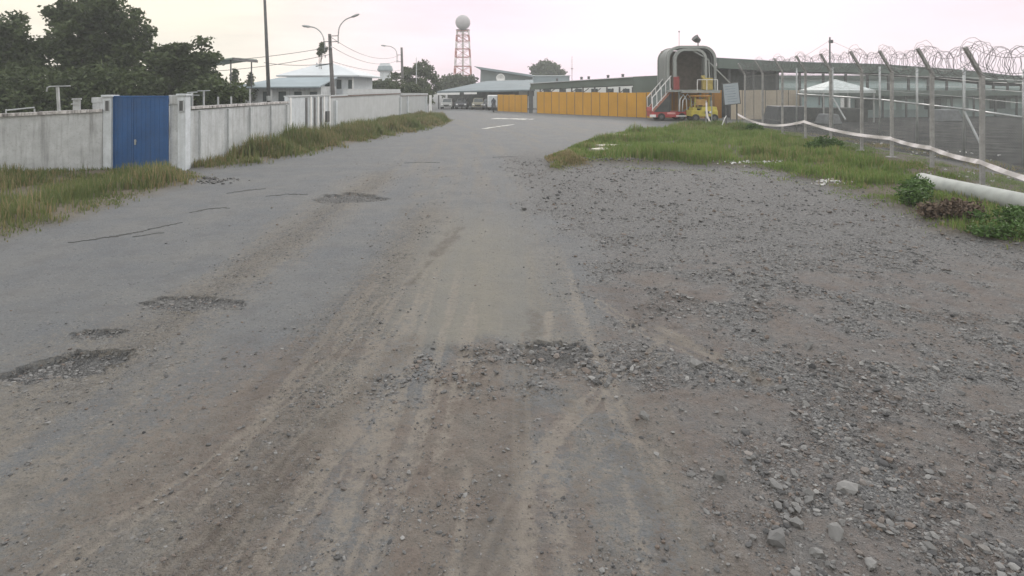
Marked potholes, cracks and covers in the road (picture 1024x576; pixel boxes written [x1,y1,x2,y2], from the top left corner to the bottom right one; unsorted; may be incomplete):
pothole [305,192,396,205]
pothole [63,328,135,344]
pothole [519,339,600,376]
pothole [0,348,143,389]
pothole [134,295,252,315]
